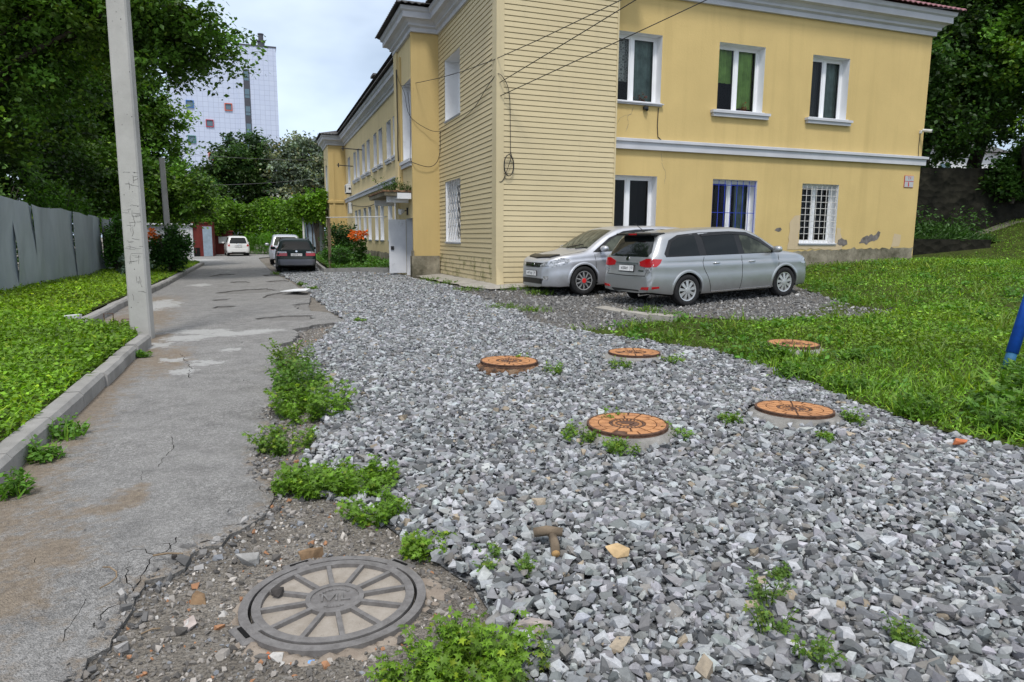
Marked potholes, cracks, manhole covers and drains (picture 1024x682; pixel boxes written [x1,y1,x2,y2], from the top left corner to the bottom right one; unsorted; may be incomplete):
crack [63,537,177,641]
manhole cover [575,412,678,453]
manhole cover [603,348,666,368]
manhole cover [767,339,824,356]
manhole cover [744,400,847,435]
manhole cover [477,355,540,377]
manhole cover [228,556,426,657]
